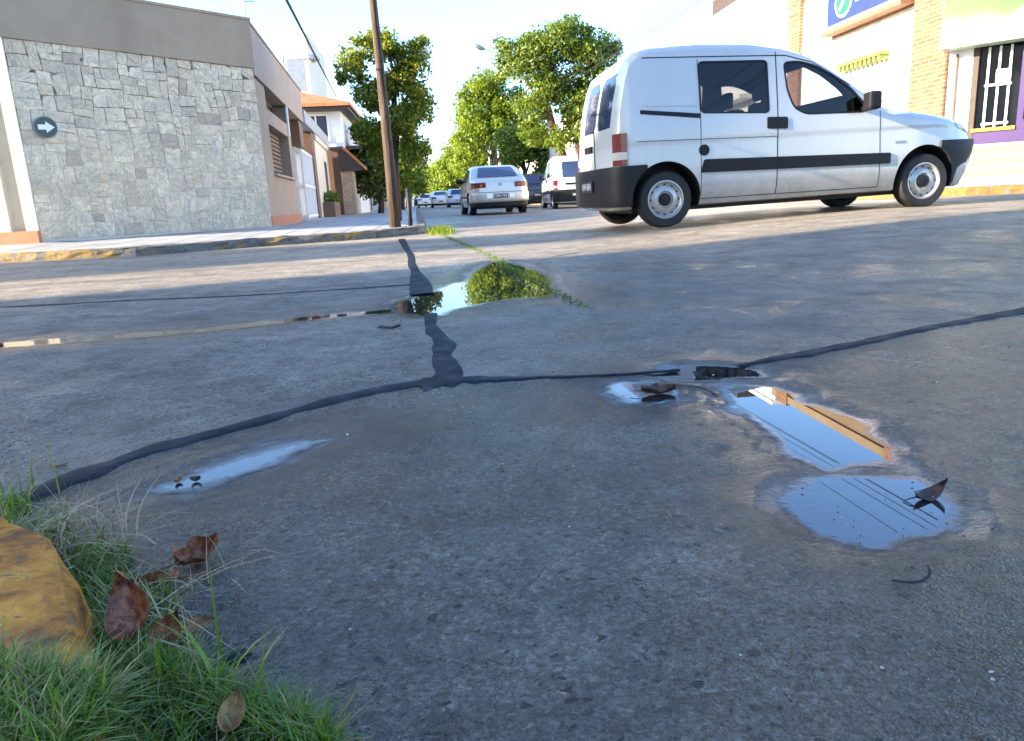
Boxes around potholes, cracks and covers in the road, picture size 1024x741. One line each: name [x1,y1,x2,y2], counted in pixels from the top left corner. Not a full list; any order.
pothole [694,369,751,380]
